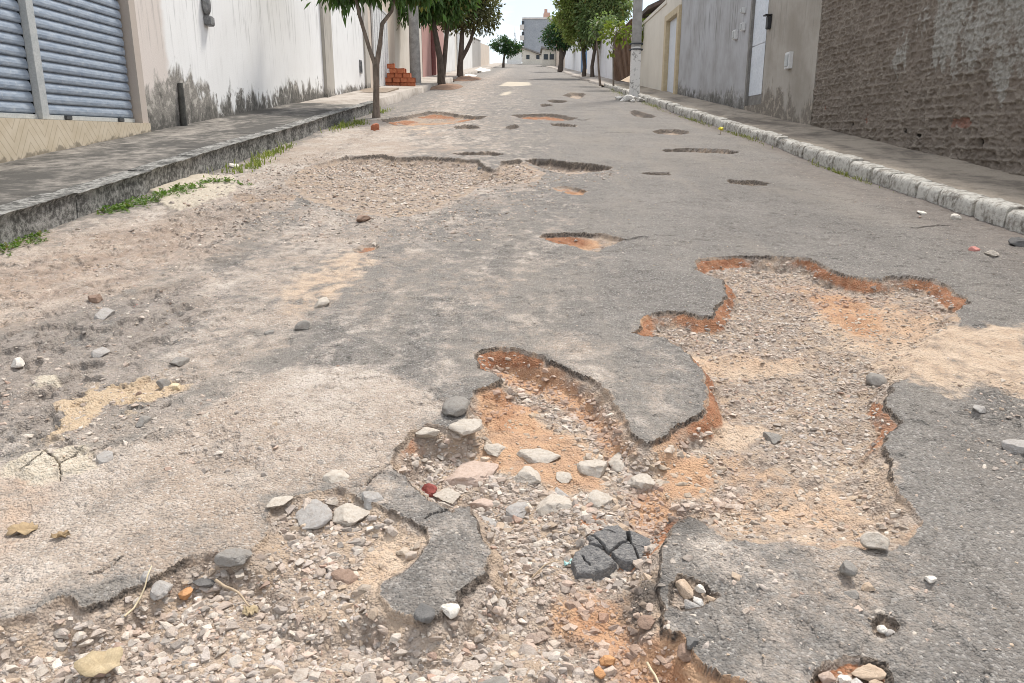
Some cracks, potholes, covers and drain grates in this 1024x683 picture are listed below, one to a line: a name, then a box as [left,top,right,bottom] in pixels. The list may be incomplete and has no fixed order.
pothole [0,346,751,683]
pothole [551,186,588,196]
pothole [809,654,895,683]
pothole [378,111,488,126]
crack [20,446,87,482]
pothole [629,110,656,118]
pothole [525,158,614,174]
pothole [870,614,900,639]
pothole [538,232,625,252]
pothole [284,154,547,218]
pothole [511,113,577,121]
pothole [632,255,971,551]
